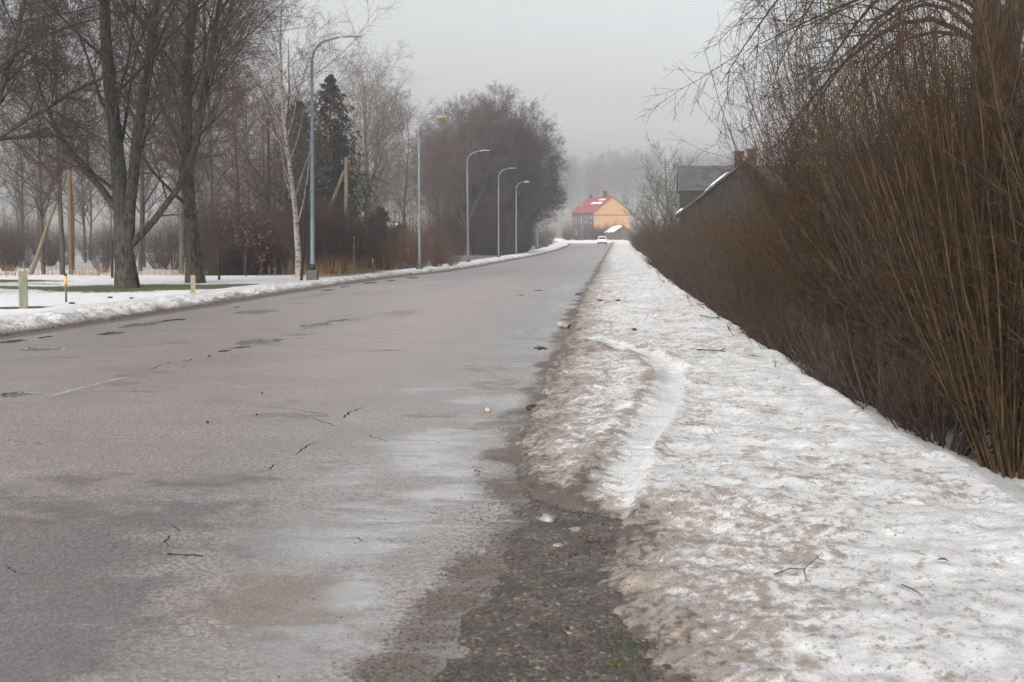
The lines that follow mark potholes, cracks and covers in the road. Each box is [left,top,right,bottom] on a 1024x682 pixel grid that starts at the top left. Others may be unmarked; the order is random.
crack [243,404,360,474]
